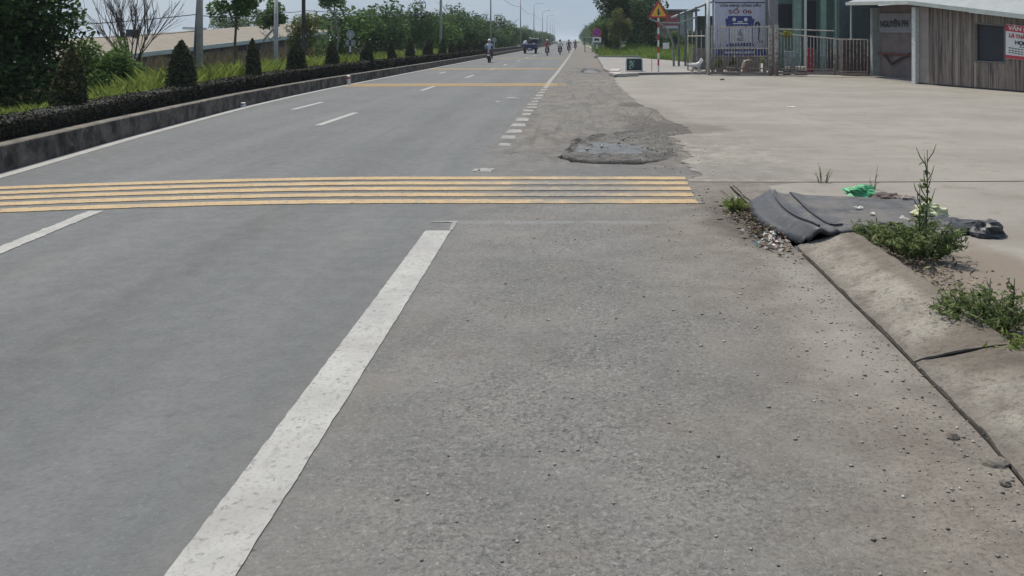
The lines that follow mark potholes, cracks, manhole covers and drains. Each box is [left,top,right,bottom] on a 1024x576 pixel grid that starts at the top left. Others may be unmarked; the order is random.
pothole [558,130,678,165]
